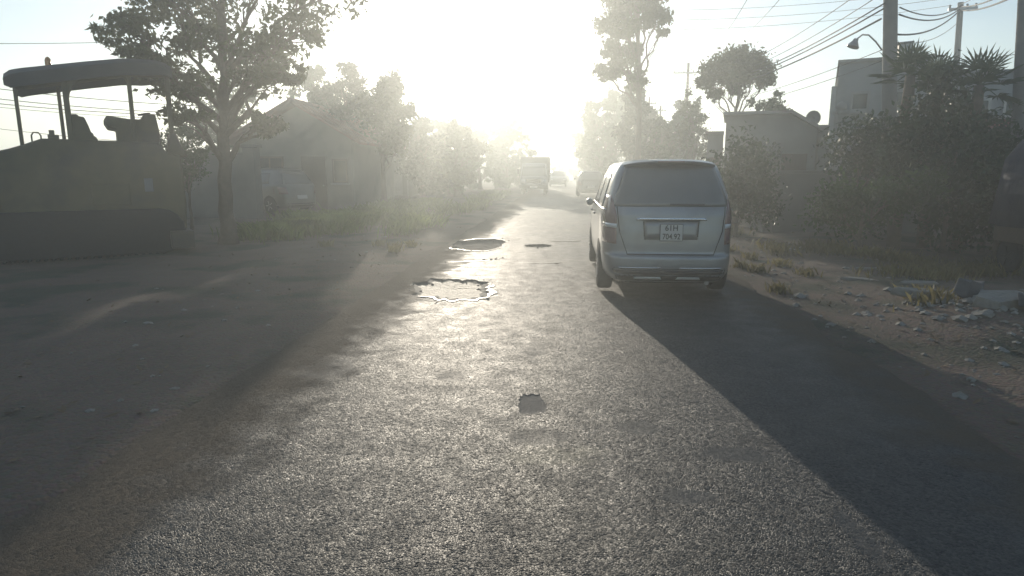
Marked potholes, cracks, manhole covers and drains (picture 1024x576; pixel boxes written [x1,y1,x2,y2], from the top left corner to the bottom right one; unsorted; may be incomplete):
pothole [449,238,506,251]
pothole [518,394,547,415]
pothole [410,278,498,302]
